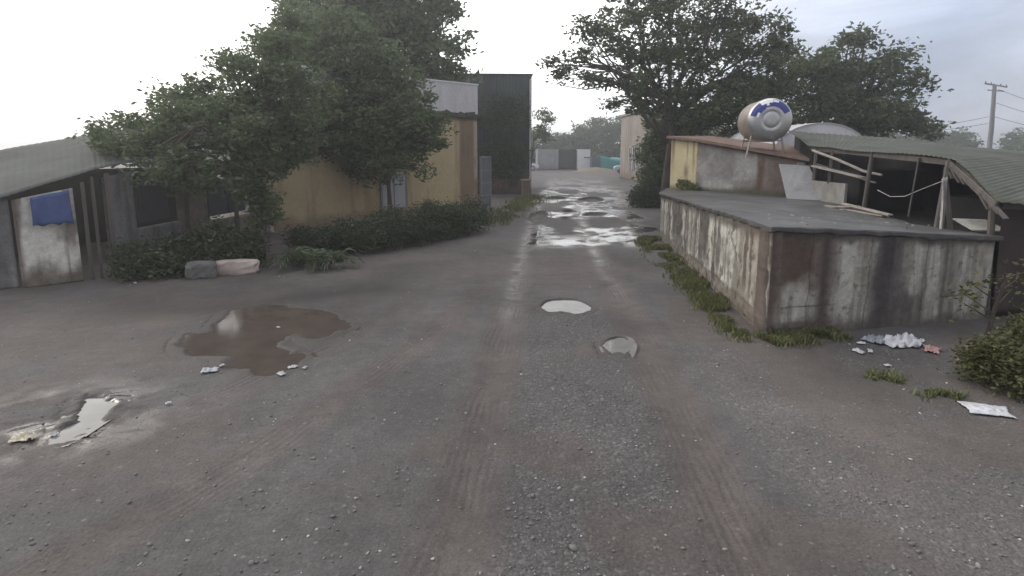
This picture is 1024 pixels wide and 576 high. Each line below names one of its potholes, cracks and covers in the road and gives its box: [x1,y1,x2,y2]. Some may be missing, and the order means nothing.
pothole [532,297,600,317]
pothole [595,334,641,360]
pothole [164,303,362,381]
pothole [35,390,138,453]
